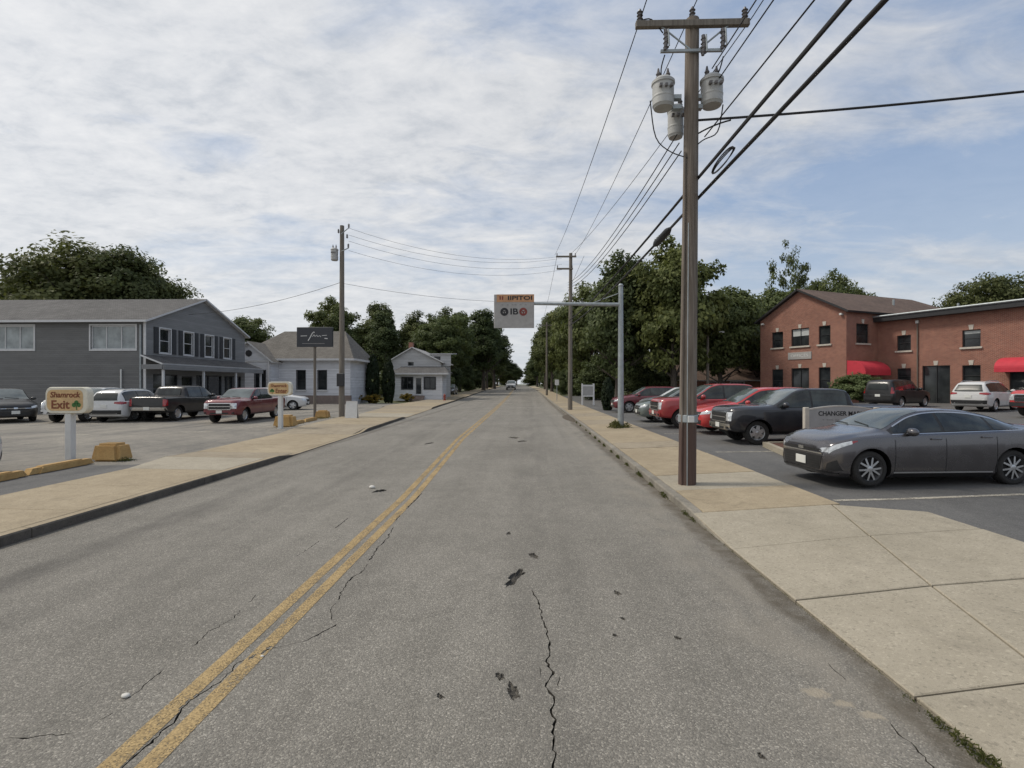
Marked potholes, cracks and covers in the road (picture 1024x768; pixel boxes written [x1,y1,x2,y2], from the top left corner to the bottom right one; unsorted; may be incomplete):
pothole [504,569,525,587]
crack [532,591,560,768]
pothole [507,681,521,700]
